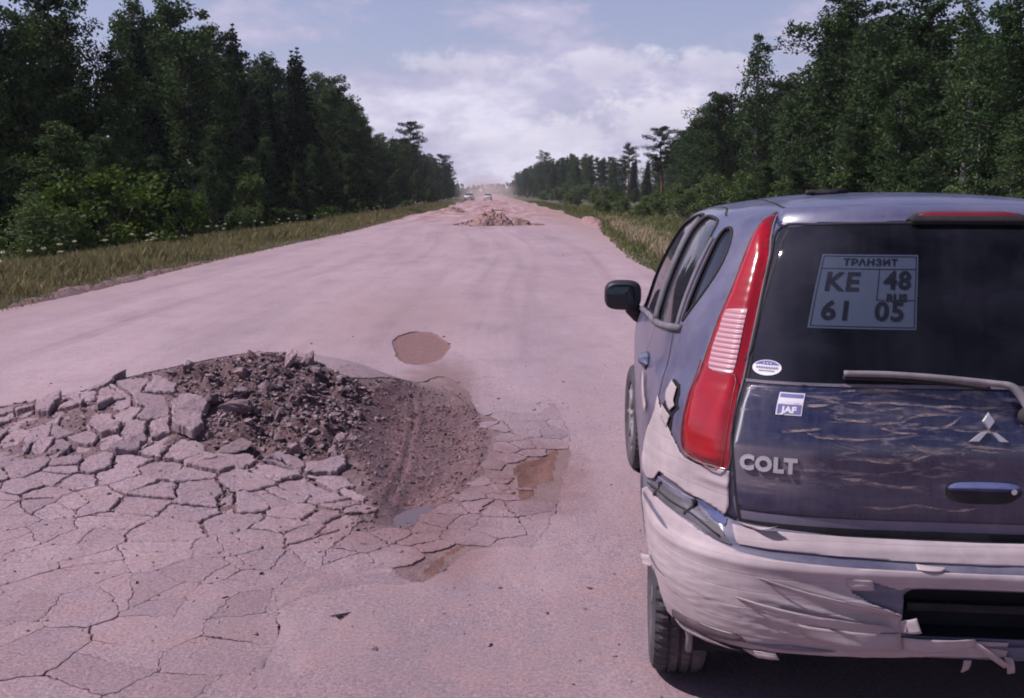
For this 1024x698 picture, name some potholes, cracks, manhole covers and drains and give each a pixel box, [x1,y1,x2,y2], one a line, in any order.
pothole [423,546,464,575]
crack [0,353,571,698]
pothole [513,450,559,501]
pothole [352,378,491,530]
pothole [392,332,450,365]
